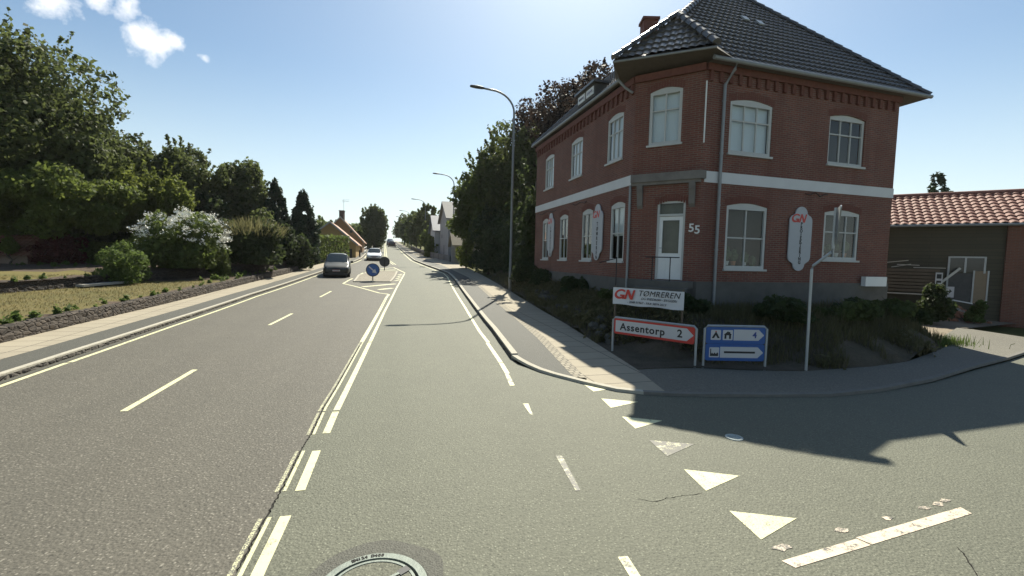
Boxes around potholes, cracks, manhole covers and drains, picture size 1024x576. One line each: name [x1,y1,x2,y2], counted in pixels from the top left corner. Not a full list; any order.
manhole cover [308,540,444,576]
